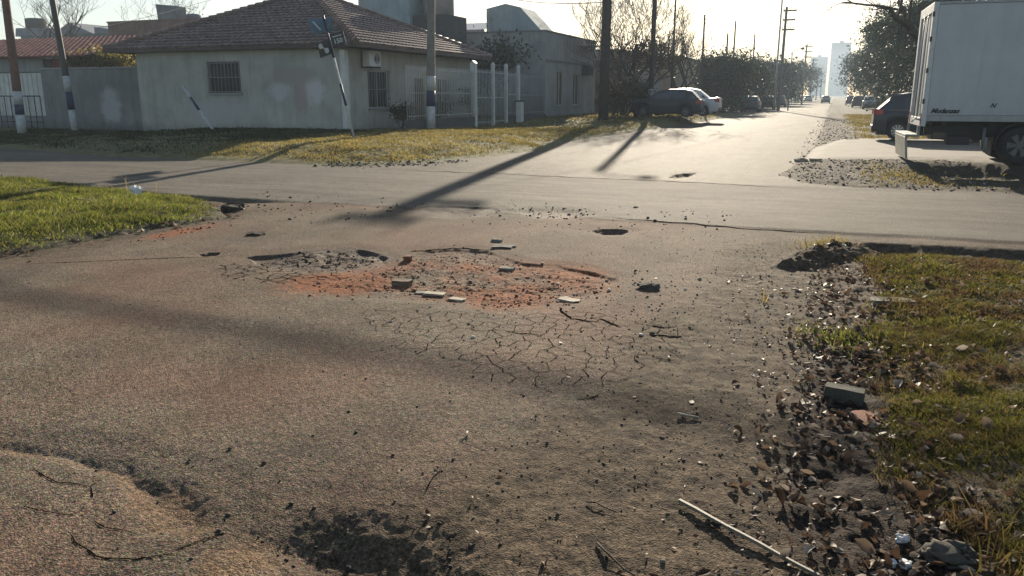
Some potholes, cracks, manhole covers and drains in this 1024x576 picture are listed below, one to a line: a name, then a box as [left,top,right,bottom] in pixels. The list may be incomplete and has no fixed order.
crack [347,307,695,400]
pothole [245,247,390,272]
pothole [212,500,509,576]
crack [24,468,228,560]
pothole [304,248,620,310]
